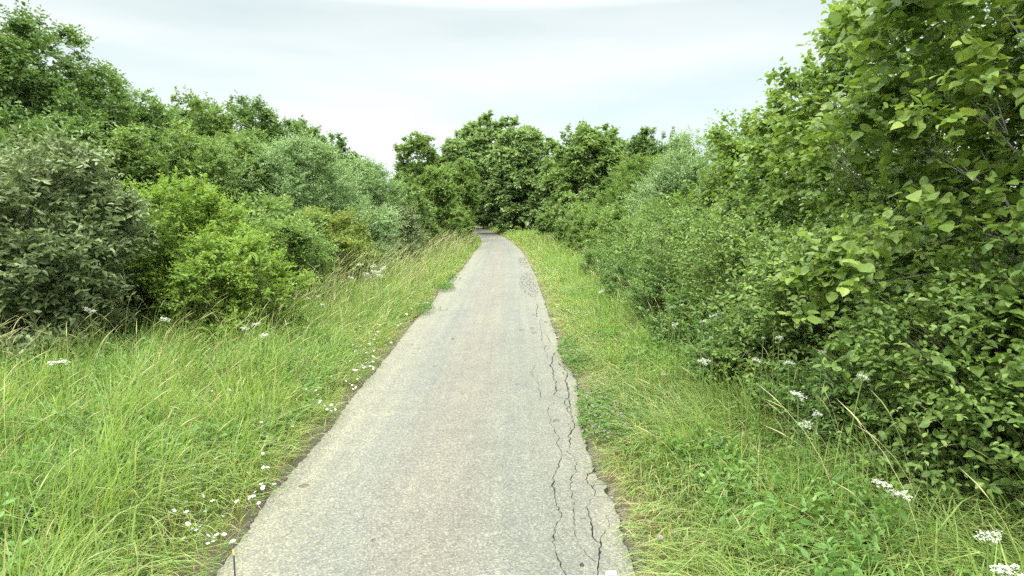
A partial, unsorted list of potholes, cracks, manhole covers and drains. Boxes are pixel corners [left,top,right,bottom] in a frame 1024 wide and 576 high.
crack [540,348,602,572]
